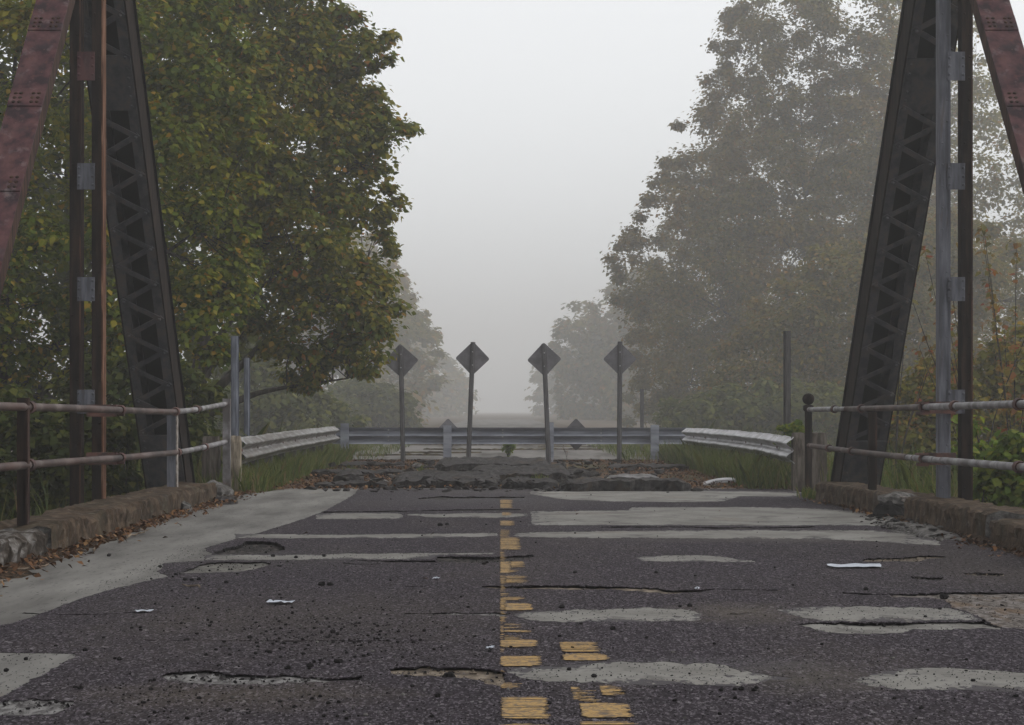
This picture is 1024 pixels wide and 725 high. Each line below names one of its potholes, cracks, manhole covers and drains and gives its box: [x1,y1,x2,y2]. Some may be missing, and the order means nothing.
pothole [214,541,285,554]
pothole [185,562,270,573]
pothole [162,671,362,685]
crack [483,586,780,594]
pothole [390,666,506,686]
